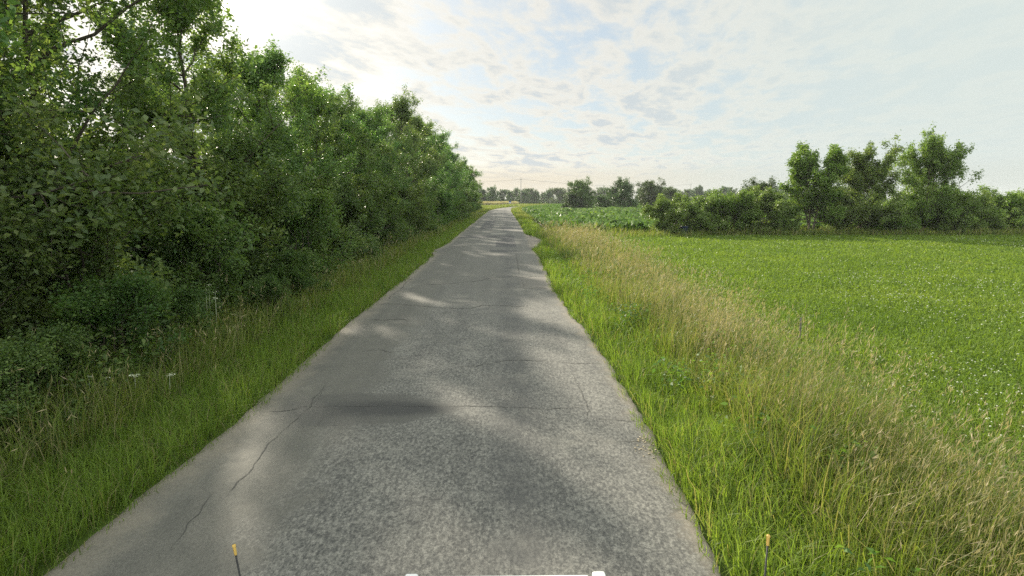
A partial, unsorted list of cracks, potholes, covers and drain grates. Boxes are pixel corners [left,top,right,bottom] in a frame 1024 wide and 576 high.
crack [231,360,625,490]
